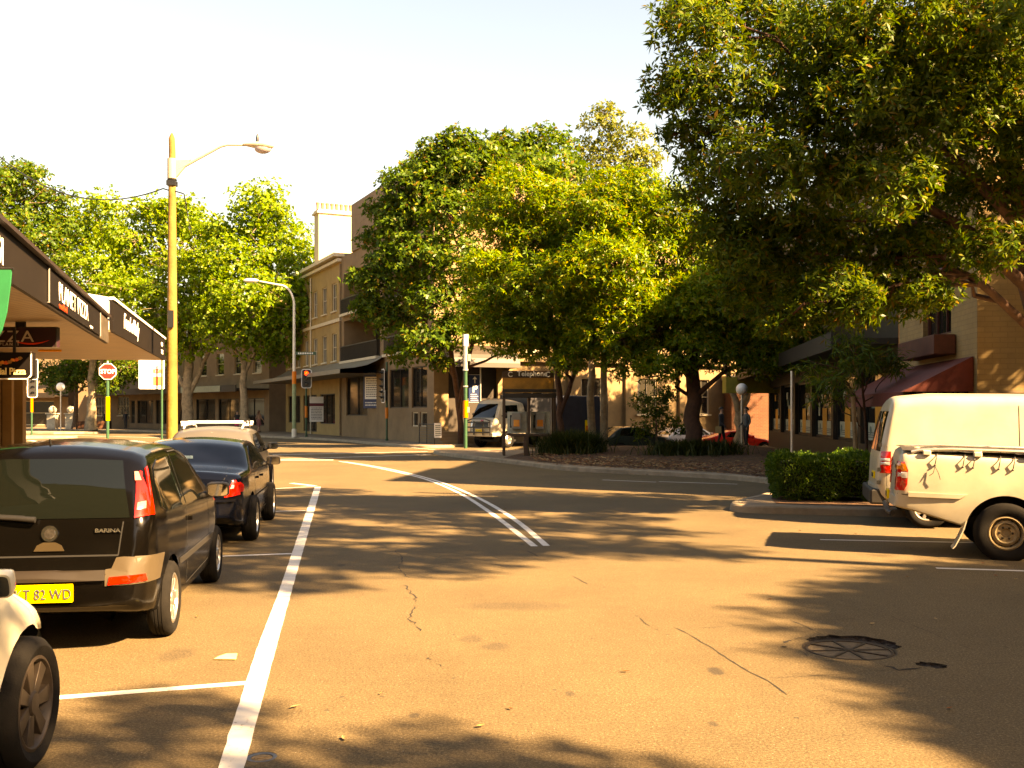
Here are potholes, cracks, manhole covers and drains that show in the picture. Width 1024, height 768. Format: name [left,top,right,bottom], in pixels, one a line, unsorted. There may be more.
utility cover [247,752,277,762]
manhole cover [801,639,898,660]
crack [395,550,441,666]
pothole [915,661,947,669]
